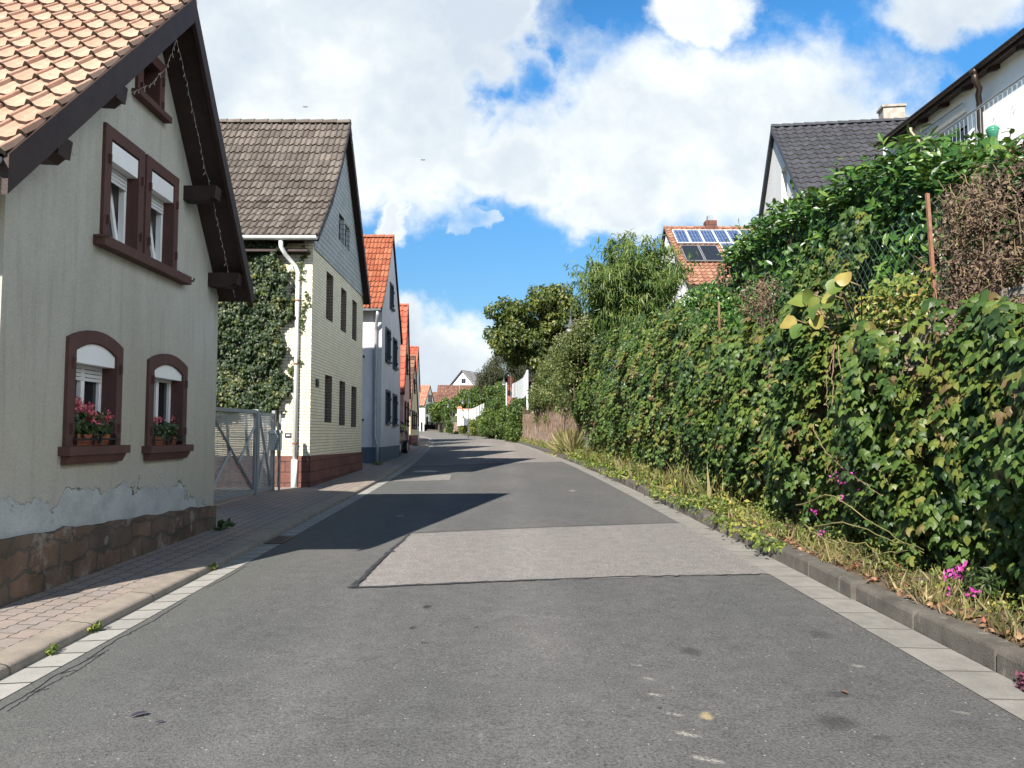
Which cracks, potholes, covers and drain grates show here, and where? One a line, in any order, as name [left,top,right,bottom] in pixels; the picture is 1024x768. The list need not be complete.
drain grate [264,536,295,544]
